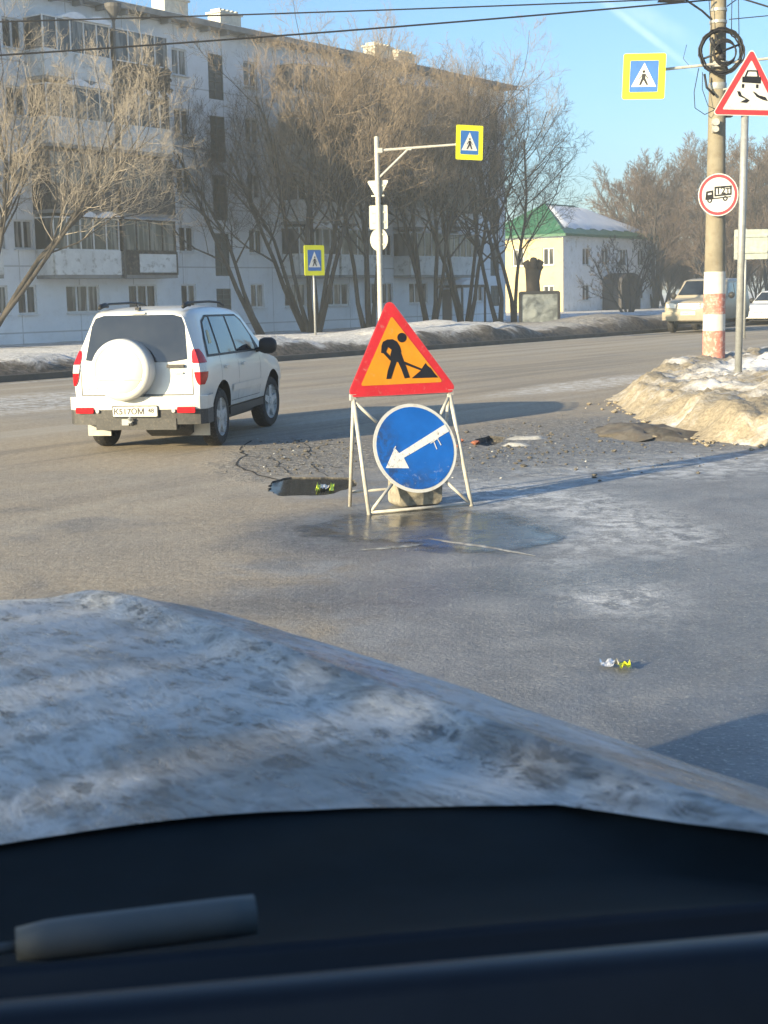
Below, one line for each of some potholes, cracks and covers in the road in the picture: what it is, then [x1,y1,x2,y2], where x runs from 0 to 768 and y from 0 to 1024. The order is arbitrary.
pothole [268,477,357,496]
crack [235,440,341,480]
